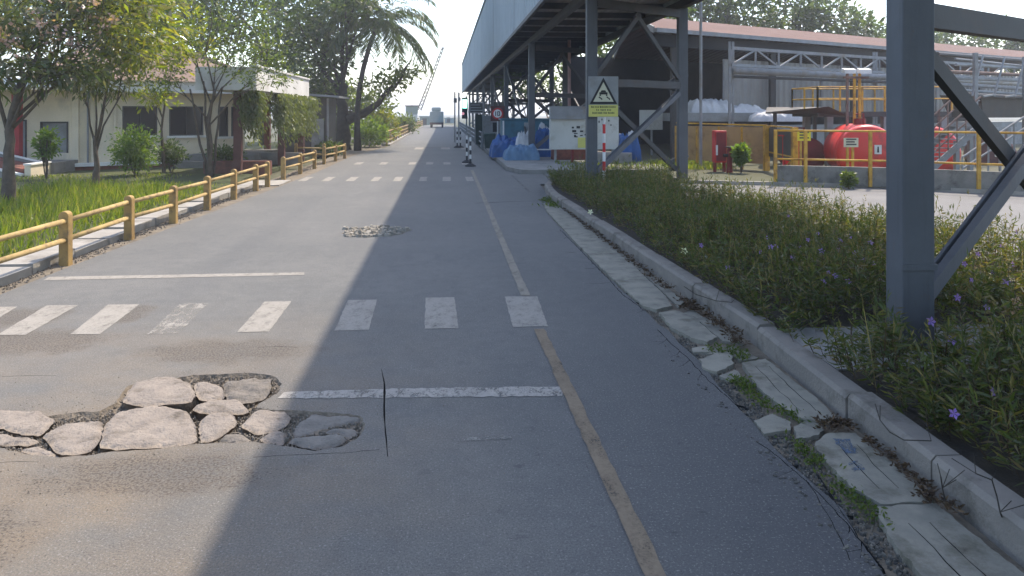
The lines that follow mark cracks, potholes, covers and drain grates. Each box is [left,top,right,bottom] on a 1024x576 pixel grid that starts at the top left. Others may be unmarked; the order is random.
crack [264,369,388,457]
crack [657,330,749,411]
pothole [16,373,365,452]
crack [758,443,886,575]
